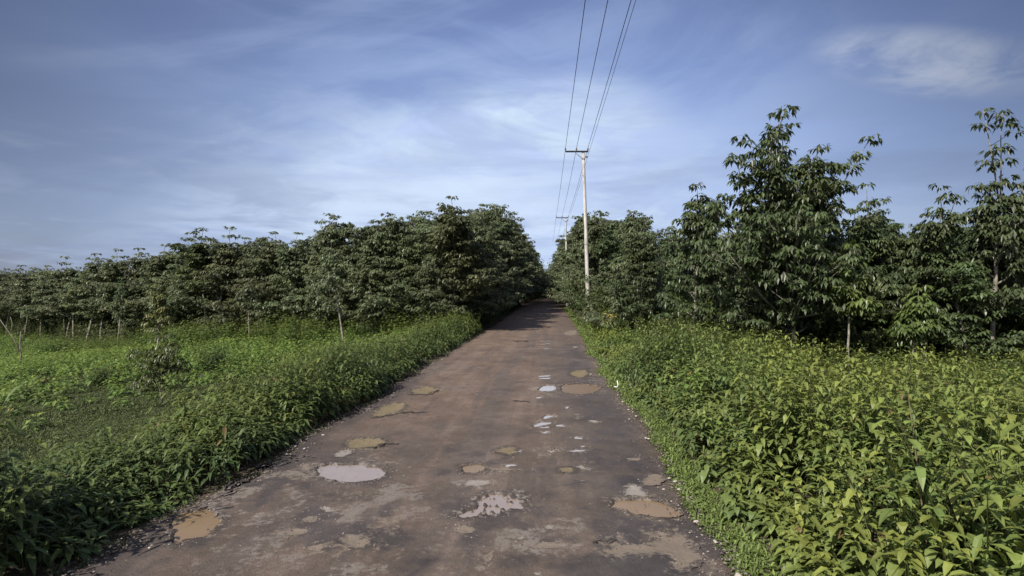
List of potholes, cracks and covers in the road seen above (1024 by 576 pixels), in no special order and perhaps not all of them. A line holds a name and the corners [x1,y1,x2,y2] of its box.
pothole [410,386,439,394]
pothole [559,383,602,394]
pothole [622,483,647,498]
pothole [611,497,683,518]
pothole [169,506,224,545]
pothole [454,492,527,518]
pothole [460,463,487,473]
pothole [343,438,386,448]
pothole [372,403,405,416]
pothole [314,462,385,482]
pothole [495,447,516,456]
pothole [642,474,667,486]
